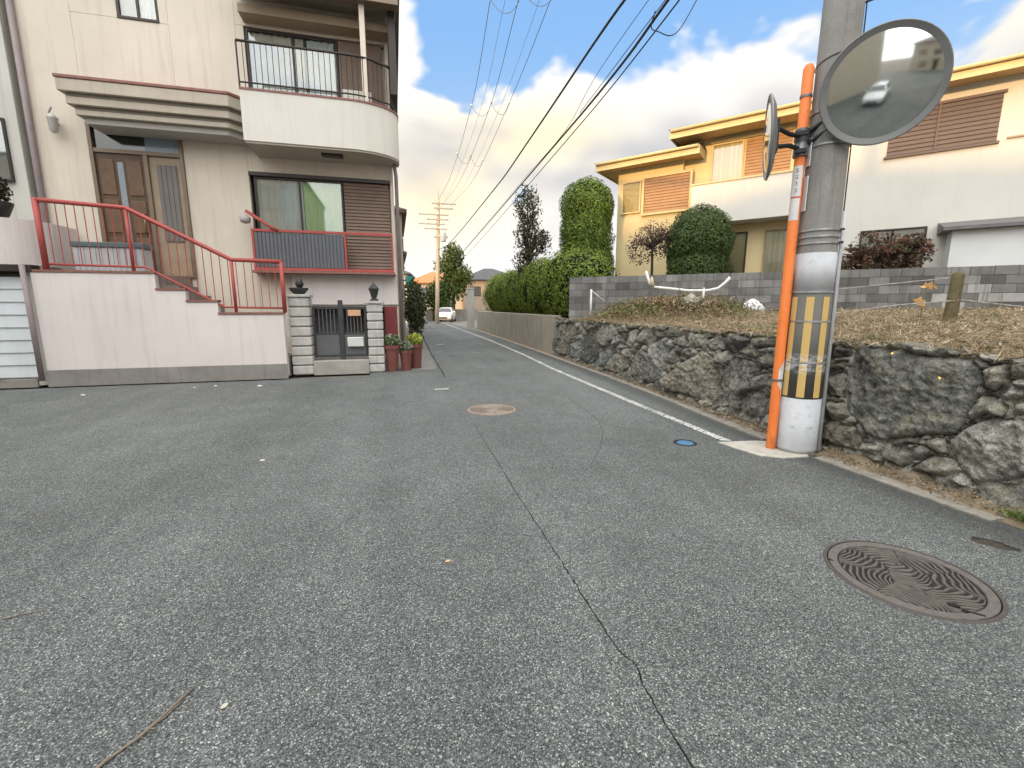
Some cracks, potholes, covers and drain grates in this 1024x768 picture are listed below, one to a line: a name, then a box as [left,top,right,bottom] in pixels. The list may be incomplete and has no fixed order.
manhole cover [823,540,1009,624]
manhole cover [465,404,518,416]
crack [474,422,694,768]
